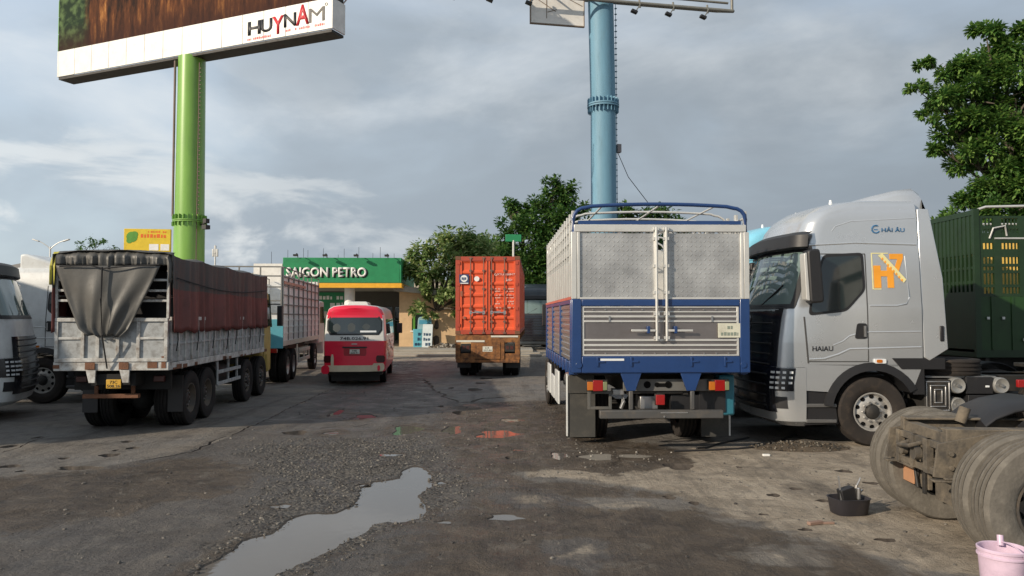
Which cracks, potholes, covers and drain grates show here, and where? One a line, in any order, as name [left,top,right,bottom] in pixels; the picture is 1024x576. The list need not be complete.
crack [423,379,511,403]
crack [132,390,329,462]
